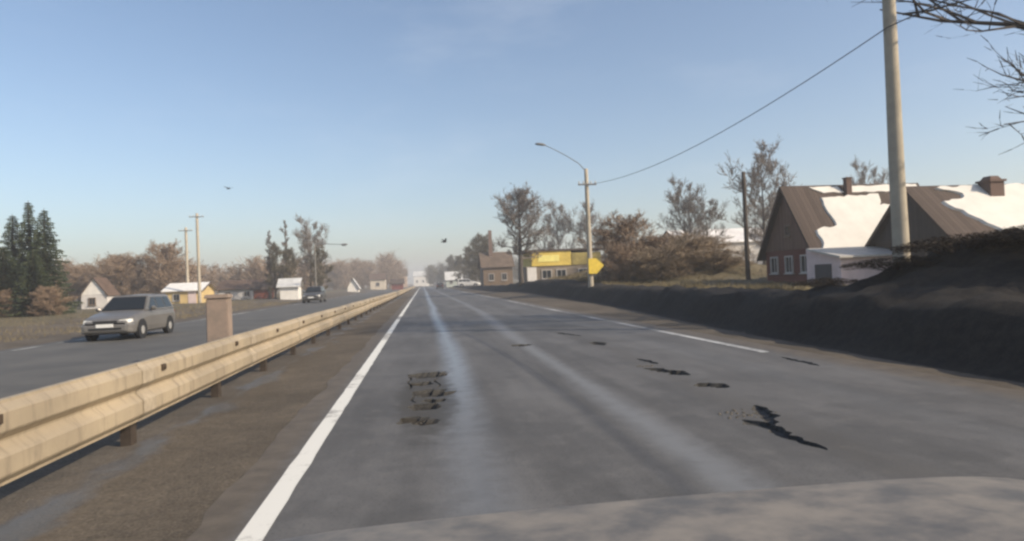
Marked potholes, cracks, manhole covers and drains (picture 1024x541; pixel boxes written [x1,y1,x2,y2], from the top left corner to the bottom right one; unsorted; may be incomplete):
pothole [396,416,440,426]
pothole [636,365,690,375]
pothole [407,403,441,411]
pothole [412,389,456,398]
pothole [407,371,448,380]
